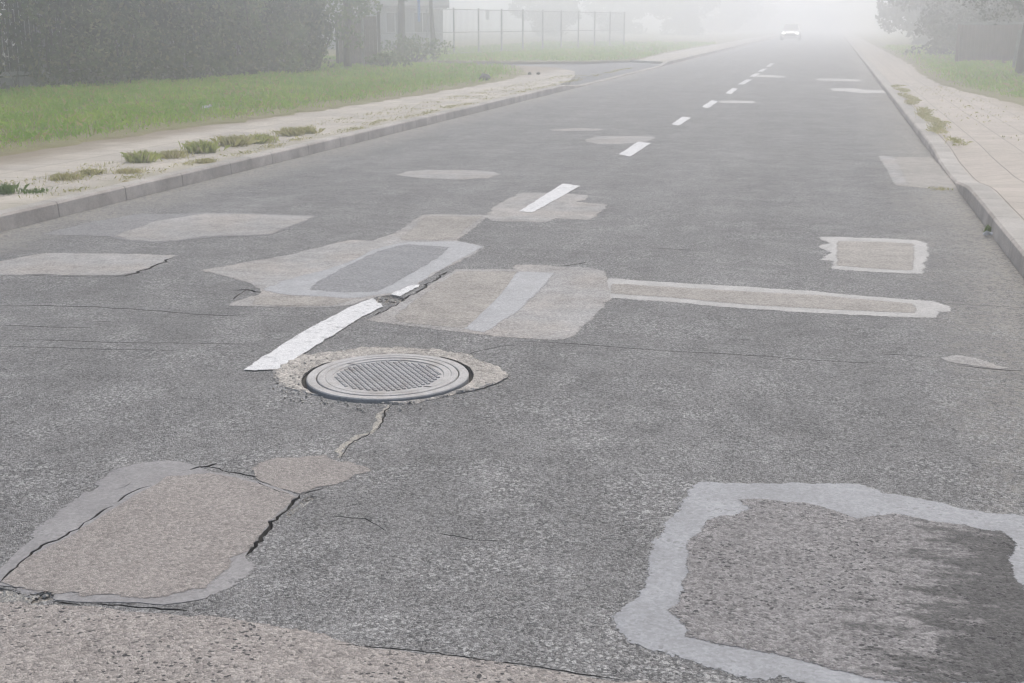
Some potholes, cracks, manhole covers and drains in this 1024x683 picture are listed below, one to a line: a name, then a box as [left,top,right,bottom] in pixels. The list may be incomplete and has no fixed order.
manhole cover [272,346,509,412]
crack [331,516,496,541]
crack [191,463,326,555]
crack [334,405,391,458]
